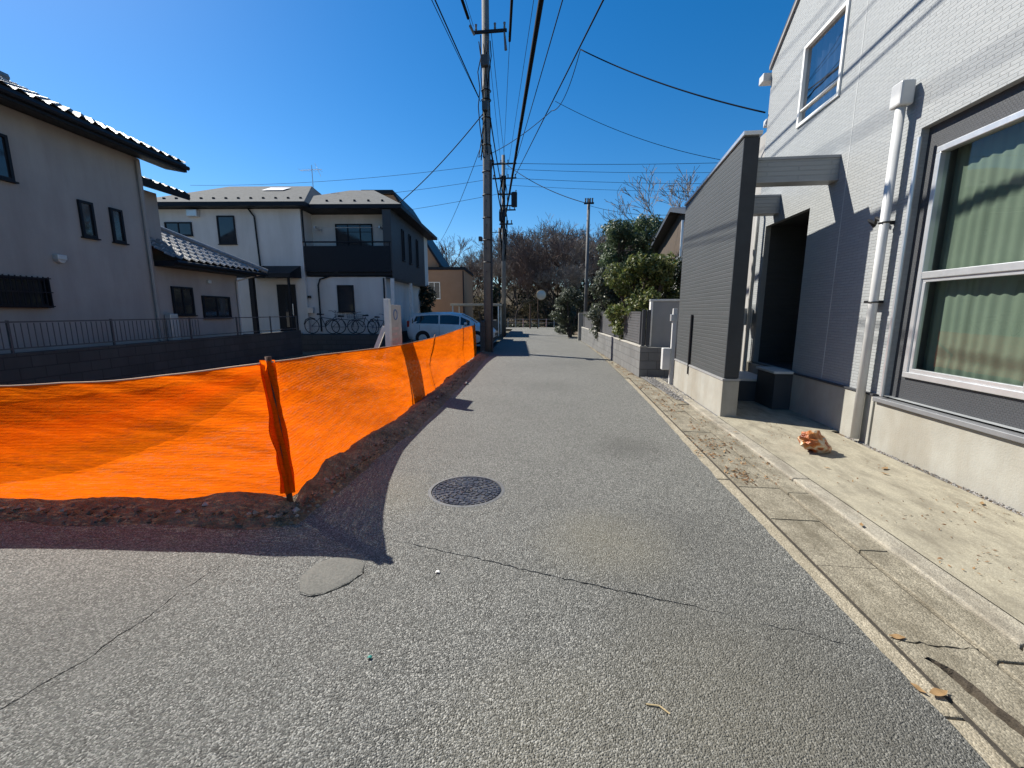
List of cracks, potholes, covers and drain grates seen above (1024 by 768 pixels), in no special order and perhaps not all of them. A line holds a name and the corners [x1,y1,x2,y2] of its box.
crack [898,640,978,650]
manhole cover [428,476,505,507]
crack [394,540,856,647]
crack [0,554,240,710]
